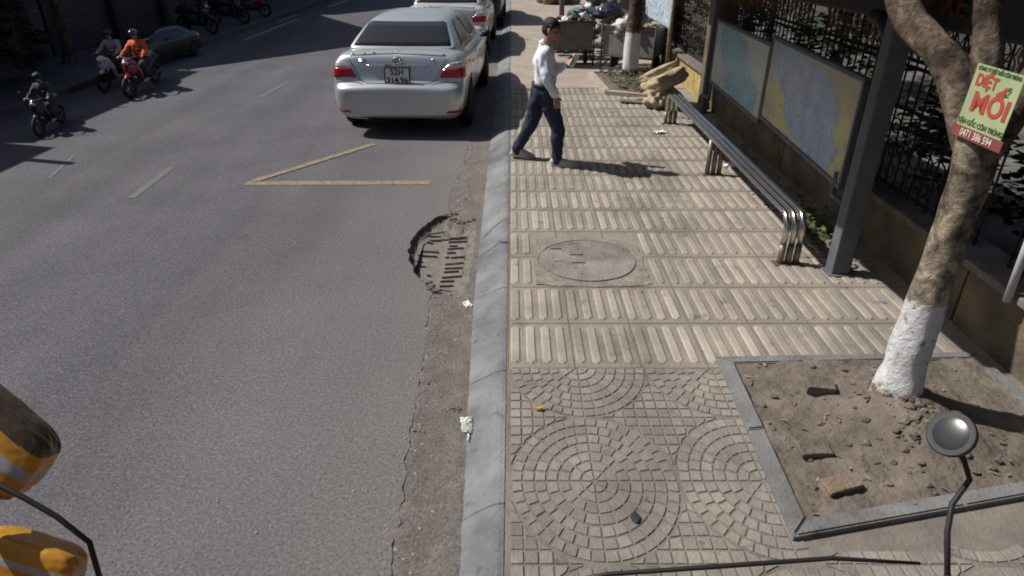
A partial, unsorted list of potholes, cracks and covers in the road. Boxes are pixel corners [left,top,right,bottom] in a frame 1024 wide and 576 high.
manhole cover [534,237,652,287]
